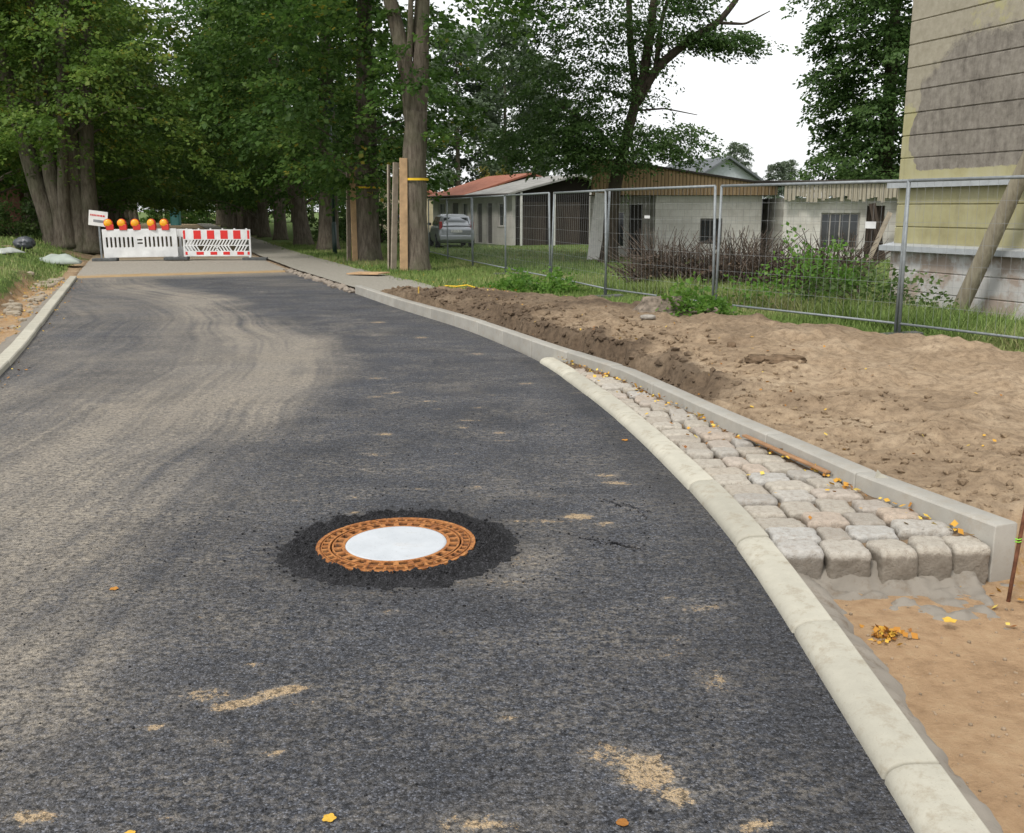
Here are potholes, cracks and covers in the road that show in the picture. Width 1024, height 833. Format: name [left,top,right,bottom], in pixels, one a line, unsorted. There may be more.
manhole cover [316,517,475,573]
crack [603,499,650,520]
